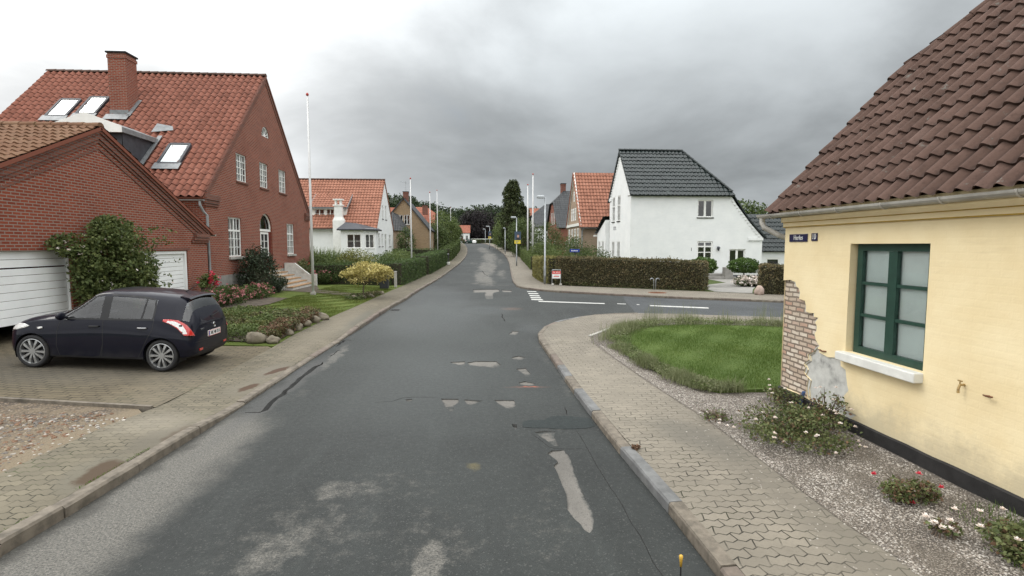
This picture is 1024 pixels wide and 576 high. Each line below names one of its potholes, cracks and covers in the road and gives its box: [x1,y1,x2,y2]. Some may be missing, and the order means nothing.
pothole [535,431,558,446]
crack [532,433,663,576]
pothole [548,450,594,533]
pothole [442,399,459,412]
crack [245,340,345,413]
pothole [495,400,516,410]
